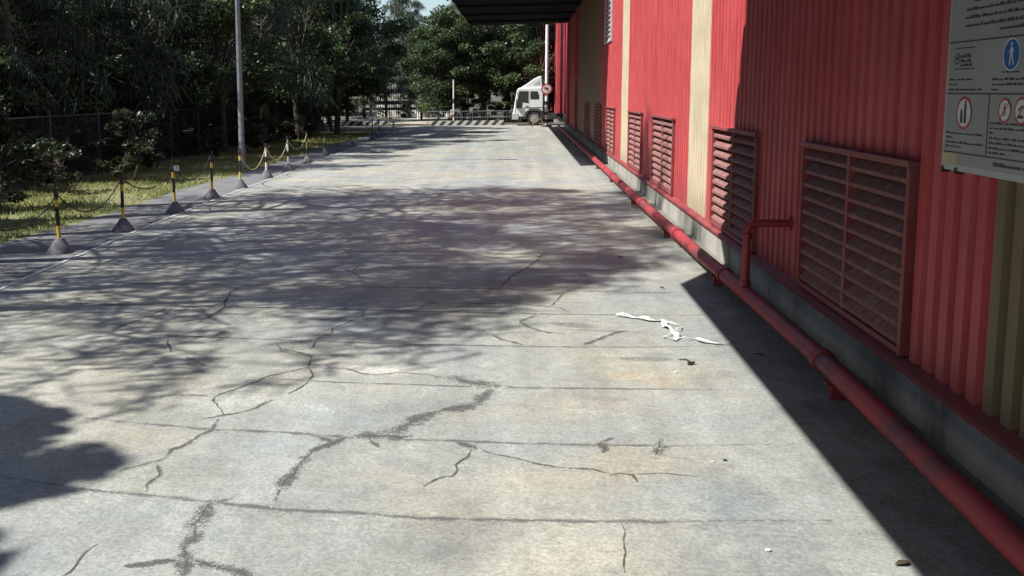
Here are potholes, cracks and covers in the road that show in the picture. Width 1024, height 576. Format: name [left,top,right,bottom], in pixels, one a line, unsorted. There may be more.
crack [195,285,244,325]
crack [418,252,630,347]
crack [112,308,696,576]
